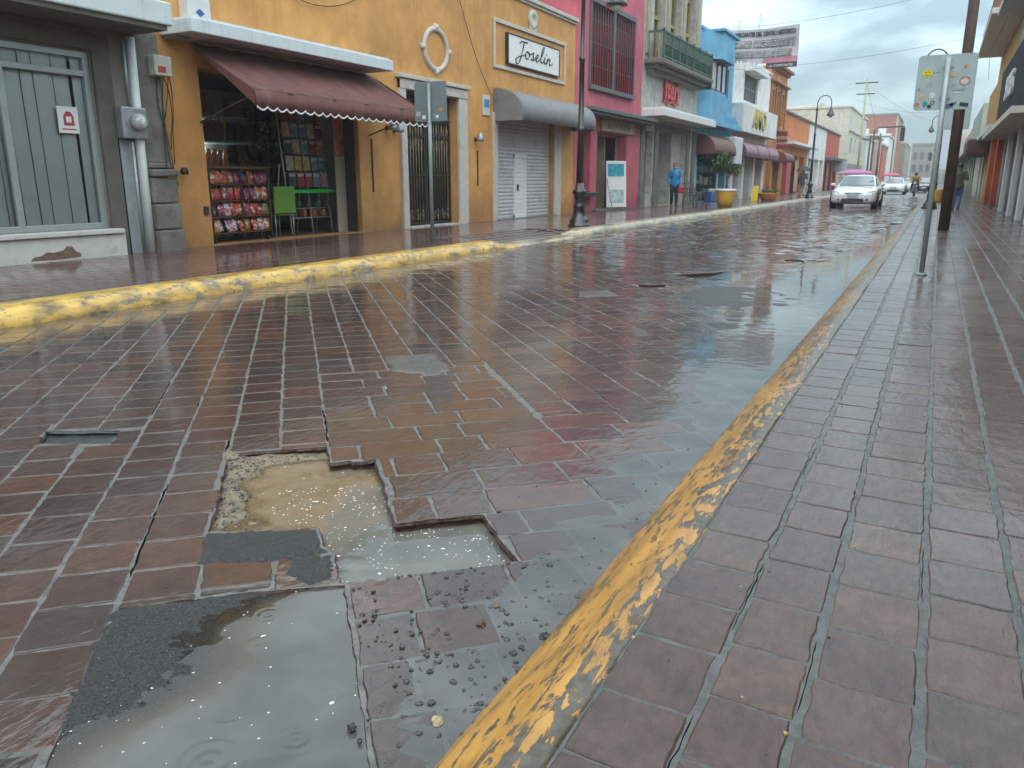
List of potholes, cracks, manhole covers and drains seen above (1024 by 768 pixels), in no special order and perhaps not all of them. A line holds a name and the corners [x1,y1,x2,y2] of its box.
crack [130,485,168,577]
crack [732,565,763,629]
crack [797,641,817,712]
pothole [208,447,517,584]
crack [667,717,693,768]
